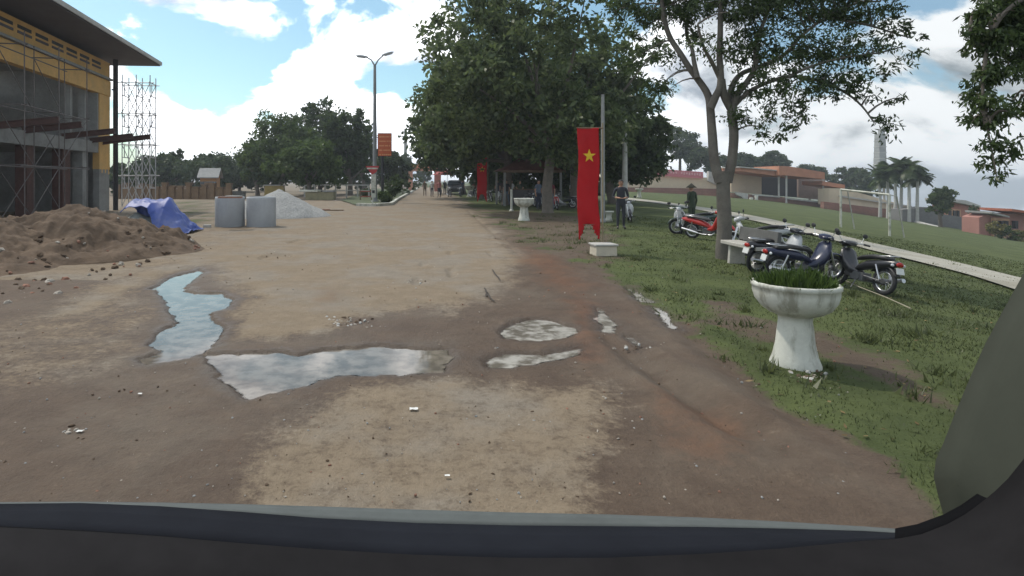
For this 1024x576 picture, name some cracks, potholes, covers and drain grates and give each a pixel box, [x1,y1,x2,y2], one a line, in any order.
pothole [493,316,585,342]
pothole [194,342,464,403]
pothole [128,268,238,367]
